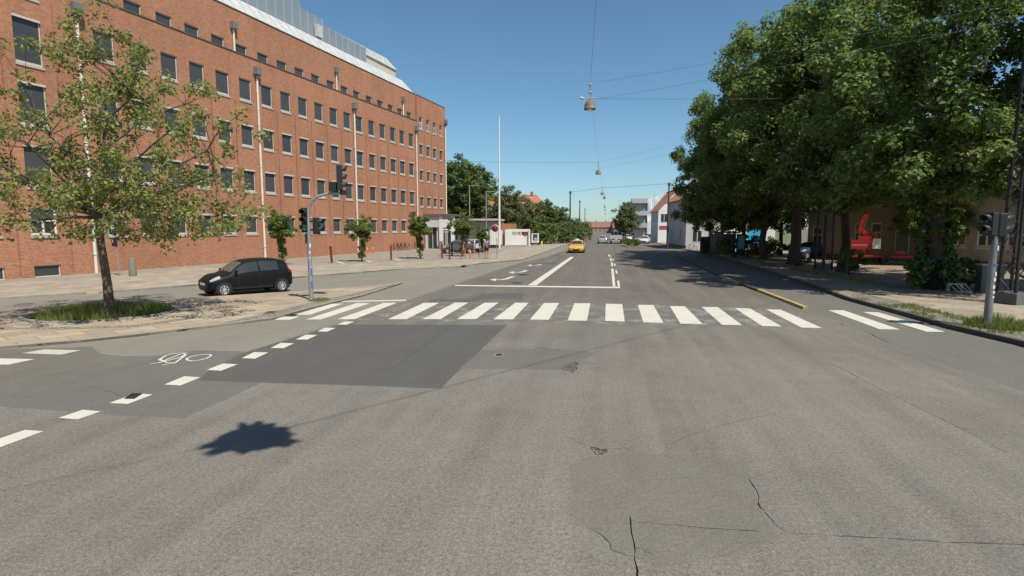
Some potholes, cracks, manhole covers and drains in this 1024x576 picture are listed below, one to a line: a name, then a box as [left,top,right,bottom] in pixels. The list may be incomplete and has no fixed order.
crack [832,364,995,447]
pothole [561,362,579,373]
crack [749,479,1024,545]
